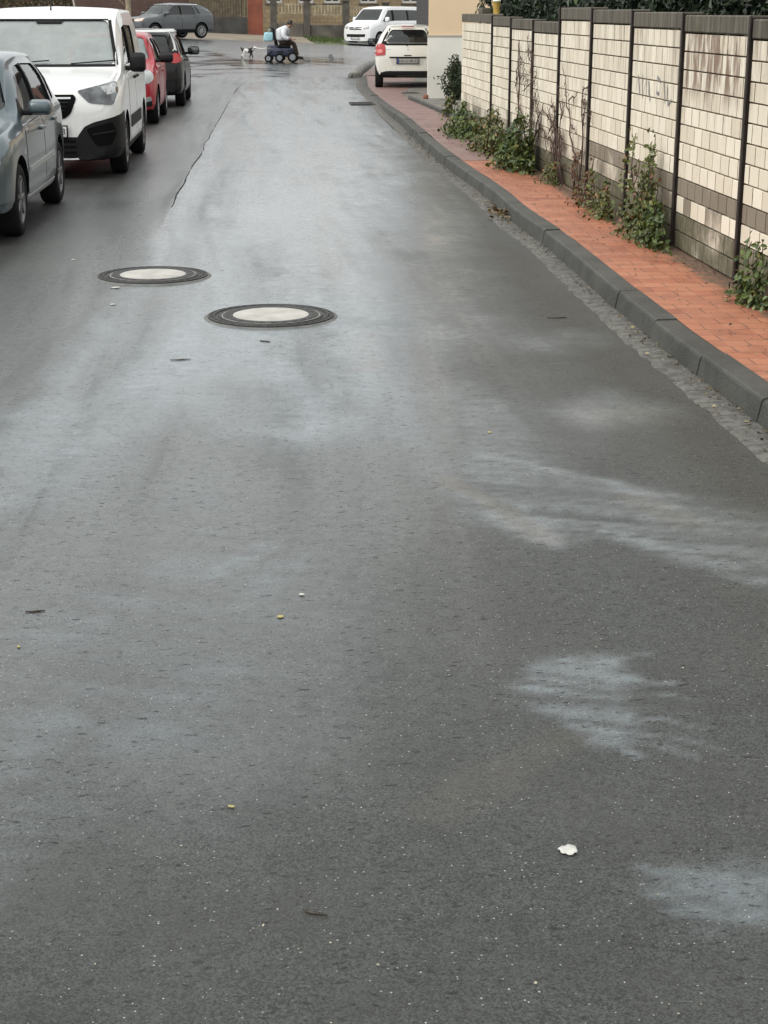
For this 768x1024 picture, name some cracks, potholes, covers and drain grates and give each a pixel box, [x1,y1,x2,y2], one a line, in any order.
manhole cover [94,266,211,286]
manhole cover [204,304,338,329]
crack [171,86,241,207]
